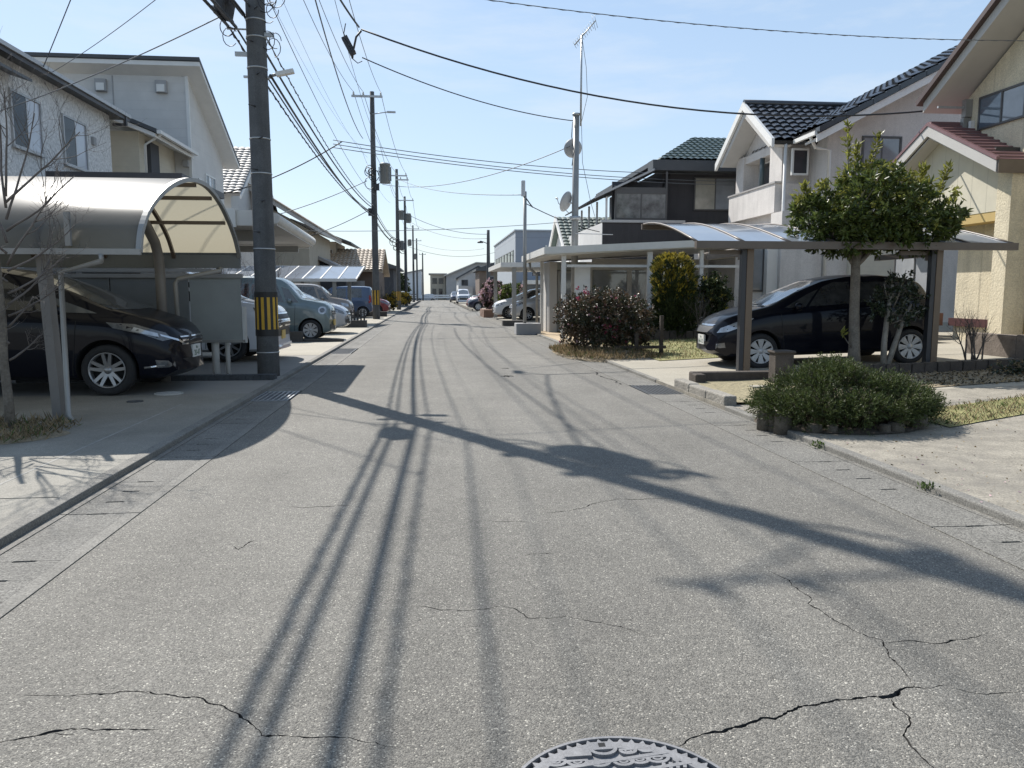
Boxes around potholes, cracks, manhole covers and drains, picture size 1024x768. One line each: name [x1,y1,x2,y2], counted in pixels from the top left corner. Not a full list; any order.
crack [398,606,631,630]
manhole cover [521,736,721,768]
crack [679,573,1024,768]
drain grate [631,385,683,394]
crack [21,691,386,747]
drain grate [251,391,300,401]
crack [553,498,677,513]
